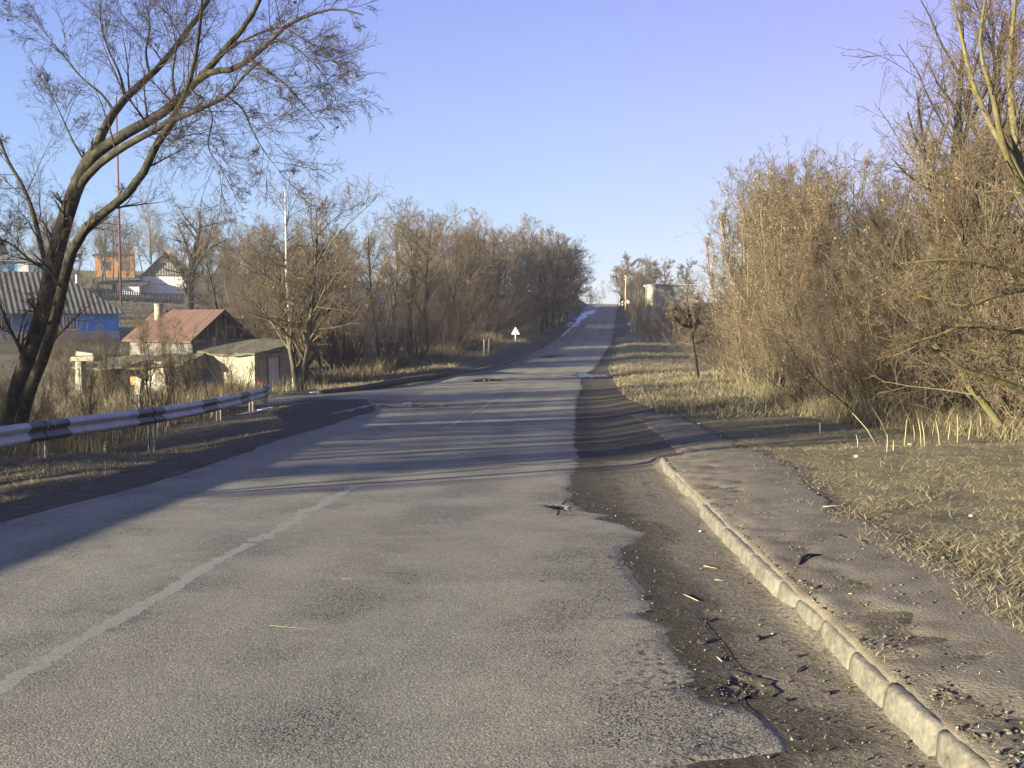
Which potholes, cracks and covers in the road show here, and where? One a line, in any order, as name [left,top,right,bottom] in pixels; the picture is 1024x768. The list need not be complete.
crack [695,614,773,732]
